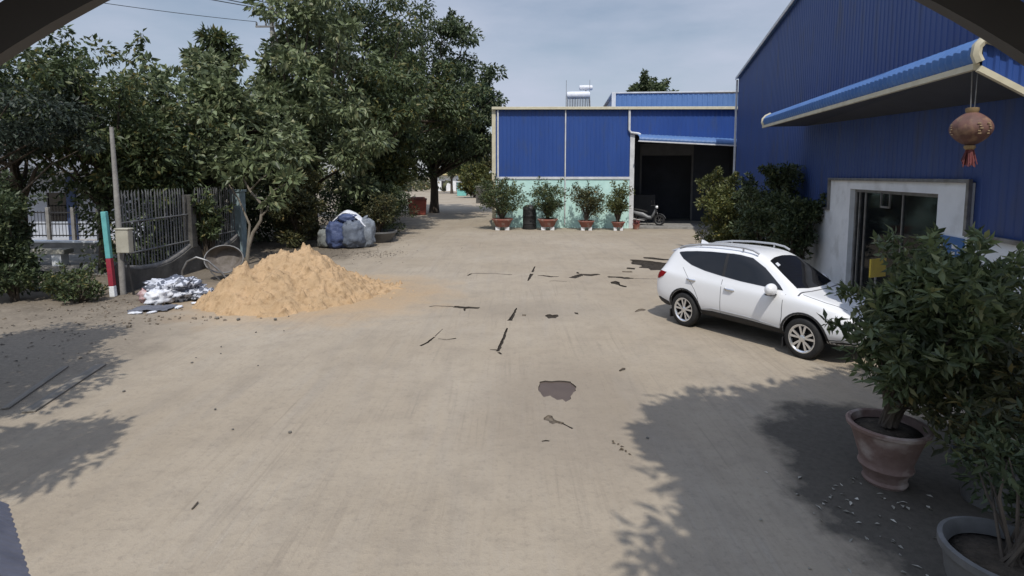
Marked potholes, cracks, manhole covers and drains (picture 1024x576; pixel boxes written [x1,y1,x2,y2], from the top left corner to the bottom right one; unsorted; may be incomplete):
pothole [538,381,576,402]
crack [527,266,644,282]
